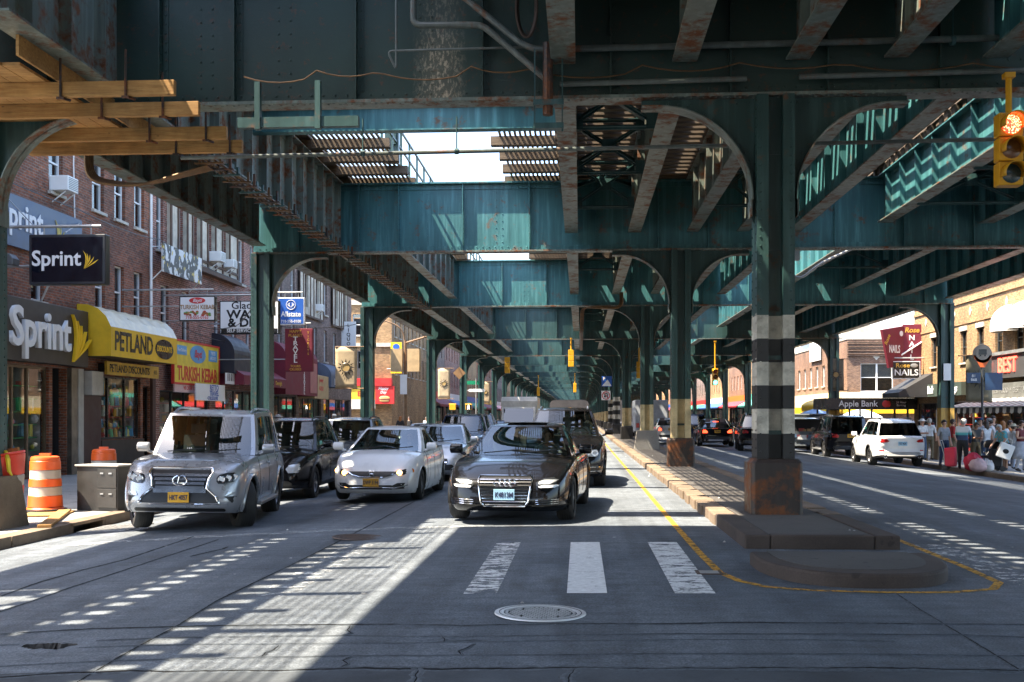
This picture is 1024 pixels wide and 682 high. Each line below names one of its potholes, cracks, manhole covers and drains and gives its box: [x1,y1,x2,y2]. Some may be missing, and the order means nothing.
manhole cover [494,604,586,622]
